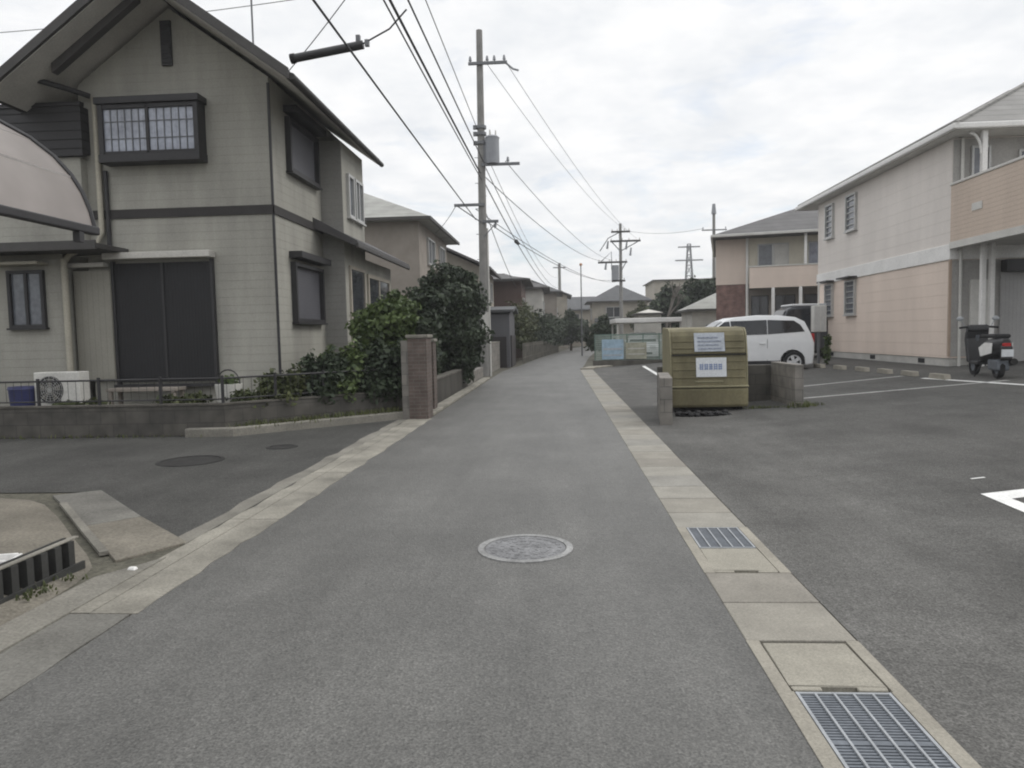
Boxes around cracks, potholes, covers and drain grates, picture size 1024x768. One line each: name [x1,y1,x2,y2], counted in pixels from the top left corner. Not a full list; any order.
manhole cover [478,534,573,563]
drain grate [686,527,756,549]
manhole cover [155,455,225,467]
drain grate [795,692,960,768]
